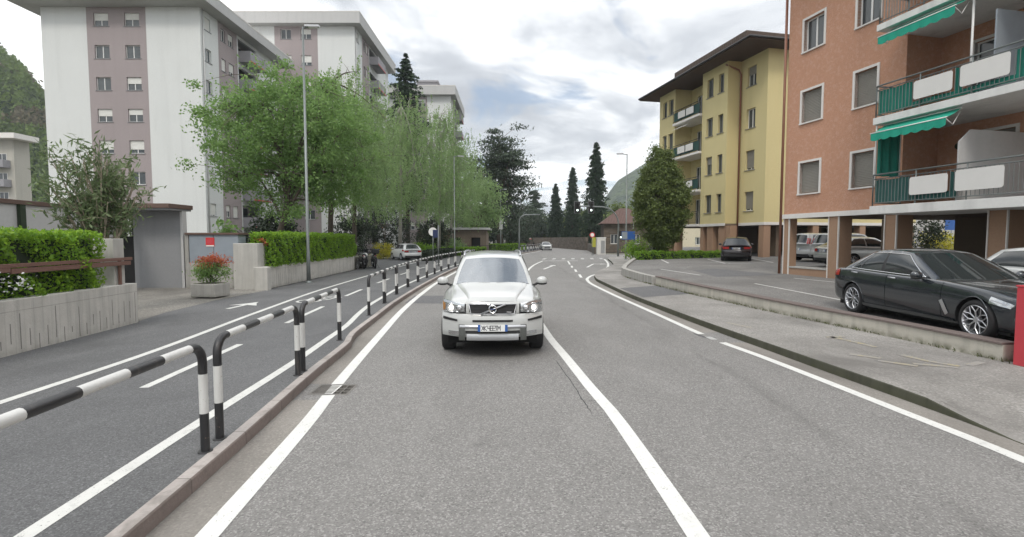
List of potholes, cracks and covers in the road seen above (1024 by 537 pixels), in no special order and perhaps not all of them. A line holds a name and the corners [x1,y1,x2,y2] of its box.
drain grate [307,384,358,395]
